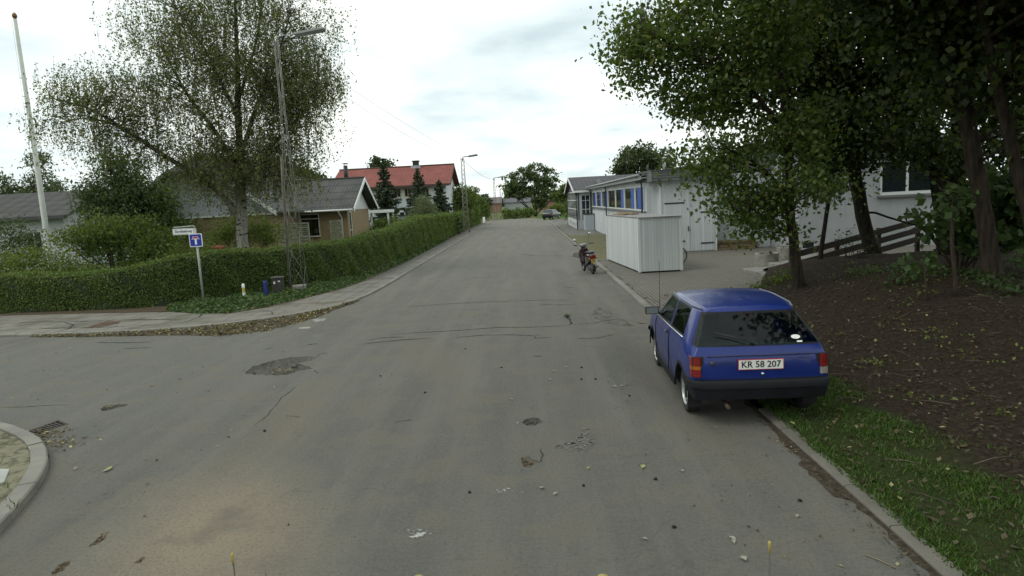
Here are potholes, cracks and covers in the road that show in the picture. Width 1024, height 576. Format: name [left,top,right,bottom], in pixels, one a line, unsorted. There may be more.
pothole [522,418,543,426]
drain grate [29,420,68,434]
crack [366,254,609,344]
